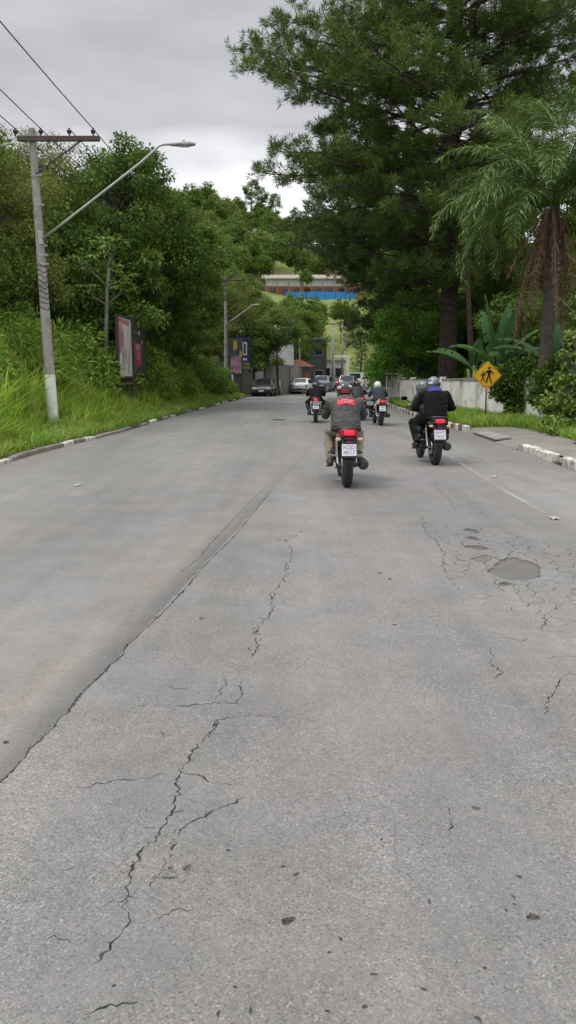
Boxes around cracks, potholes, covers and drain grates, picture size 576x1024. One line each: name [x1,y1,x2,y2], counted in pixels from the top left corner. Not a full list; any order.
crack [74,678,285,964]
crack [0,491,270,784]
crack [544,656,575,715]
pothole [486,557,542,580]
crack [422,481,576,679]
crack [248,531,308,661]
